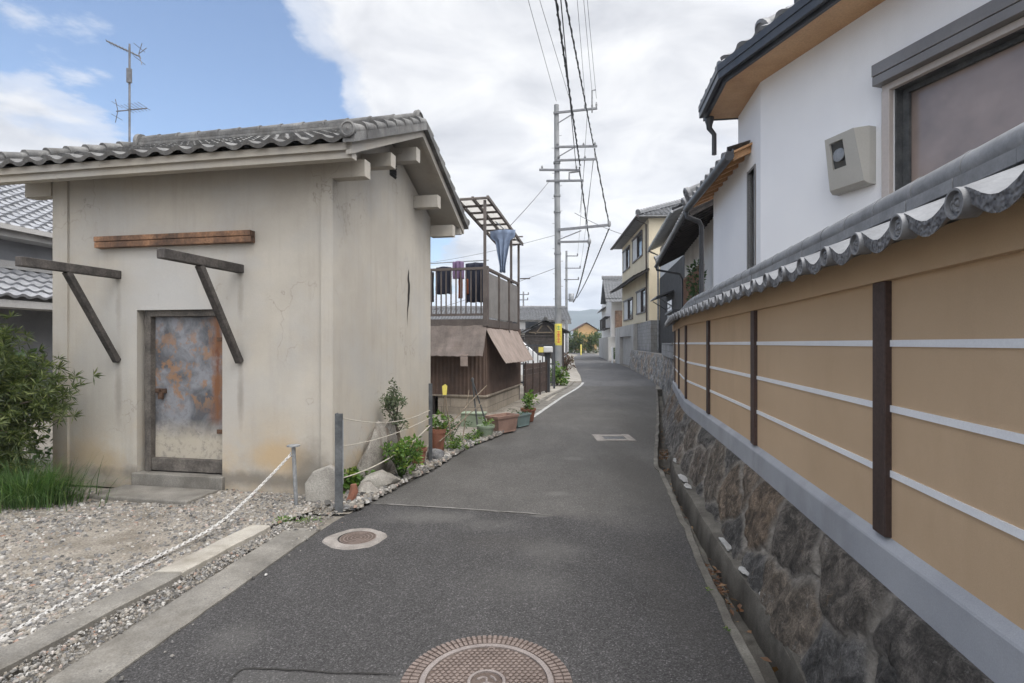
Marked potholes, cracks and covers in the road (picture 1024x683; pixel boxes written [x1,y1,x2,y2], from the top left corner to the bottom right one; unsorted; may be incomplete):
manhole cover [322,528,387,550]
manhole cover [400,635,573,683]
